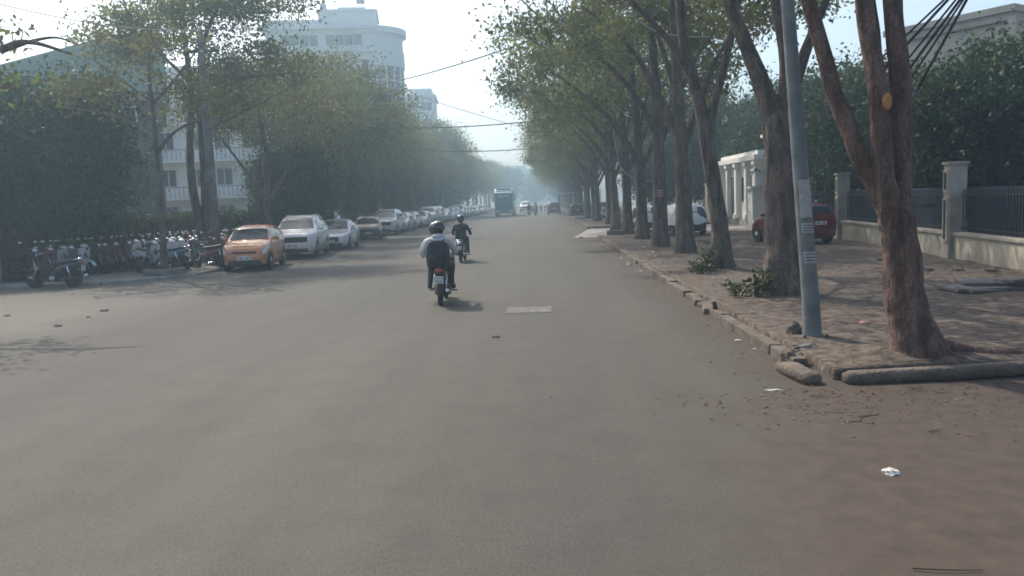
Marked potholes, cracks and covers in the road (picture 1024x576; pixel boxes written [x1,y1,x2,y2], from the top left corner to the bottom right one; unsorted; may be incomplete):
manhole cover [503,306,555,314]
